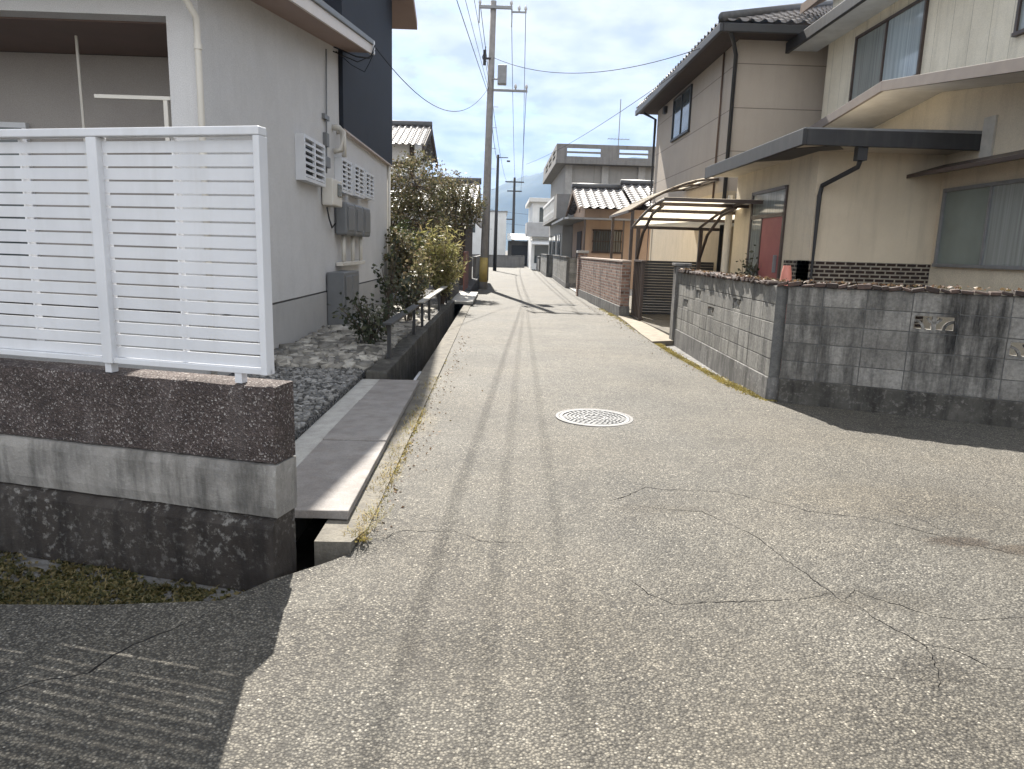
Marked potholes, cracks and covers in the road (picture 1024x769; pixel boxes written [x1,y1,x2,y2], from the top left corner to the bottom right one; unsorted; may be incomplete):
crack [606,487,1024,557]
crack [0,608,216,694]
crack [631,505,1024,691]
crack [385,530,528,543]
manhole cover [555,408,634,427]
